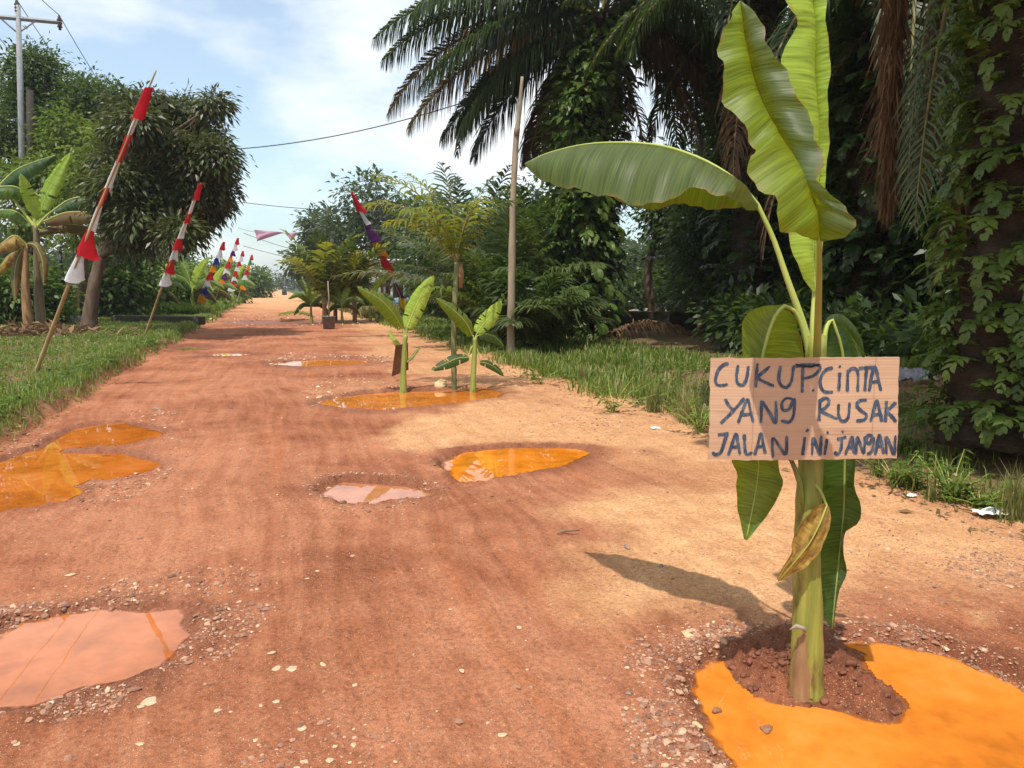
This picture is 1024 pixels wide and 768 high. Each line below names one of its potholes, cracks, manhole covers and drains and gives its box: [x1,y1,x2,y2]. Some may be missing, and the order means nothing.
pothole [0,419,178,513]
pothole [305,473,451,507]
pothole [668,622,1024,768]
pothole [431,443,603,484]
pothole [255,356,390,369]
pothole [0,594,219,723]
pothole [304,384,515,412]
